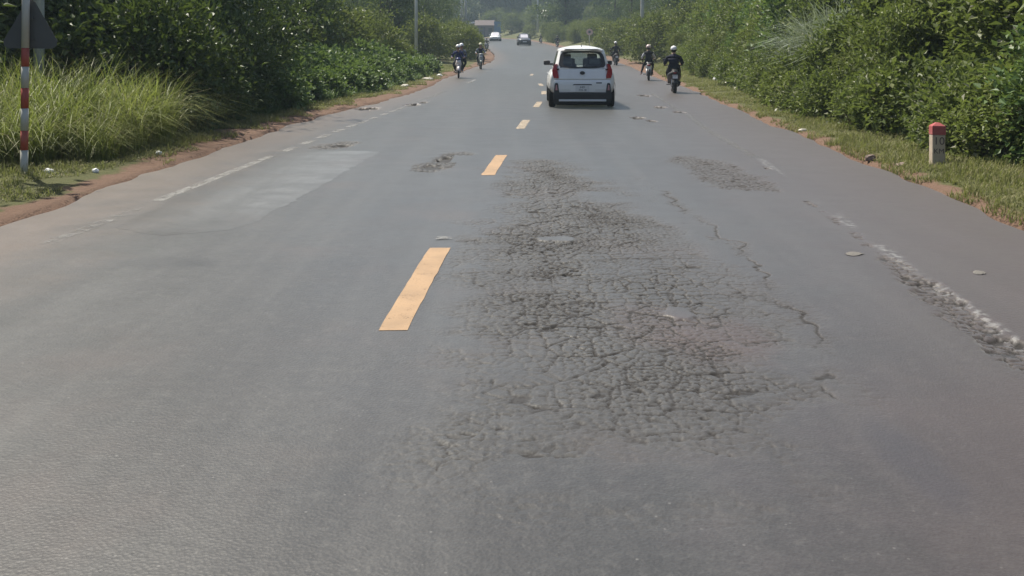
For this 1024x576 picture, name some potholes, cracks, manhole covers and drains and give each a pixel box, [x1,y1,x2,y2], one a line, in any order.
crack [239,148,1024,576]
